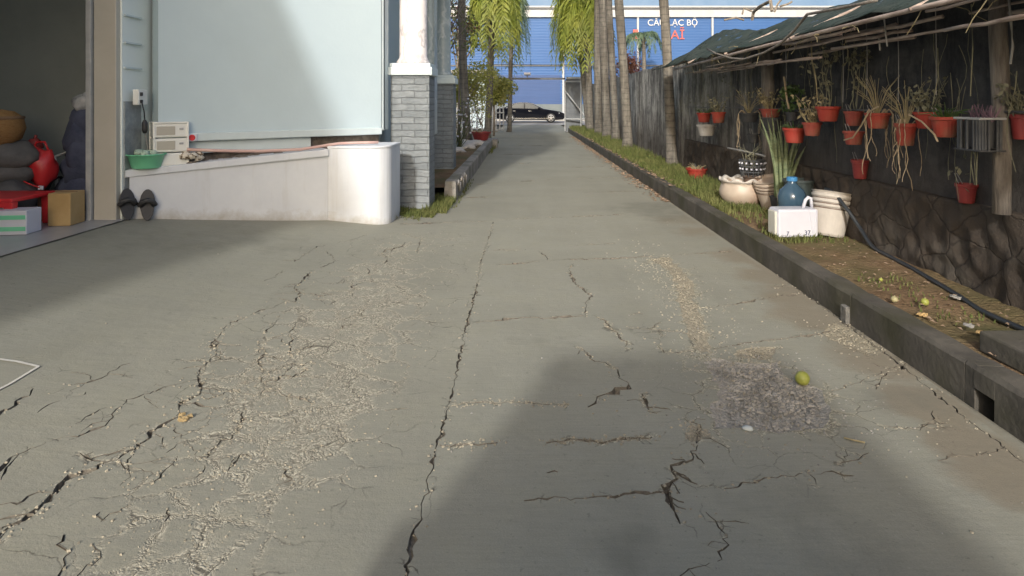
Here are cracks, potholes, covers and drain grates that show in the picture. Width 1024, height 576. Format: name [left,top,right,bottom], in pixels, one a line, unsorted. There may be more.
crack [770,276,1023,462]
crack [661,418,745,576]
crack [810,450,868,482]
crack [569,267,593,315]
crack [0,221,483,576]
crack [578,348,668,414]
crack [628,313,697,353]
